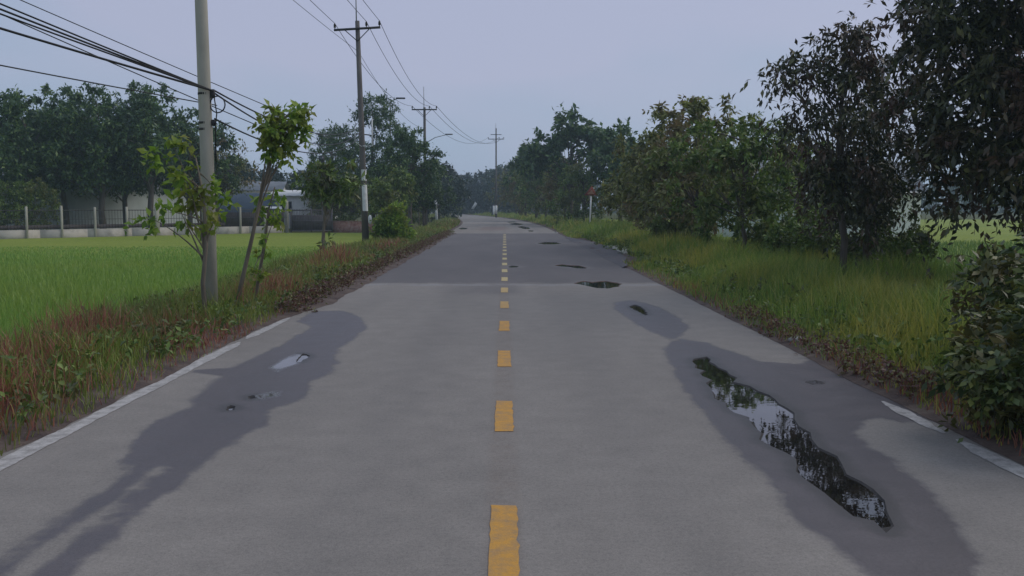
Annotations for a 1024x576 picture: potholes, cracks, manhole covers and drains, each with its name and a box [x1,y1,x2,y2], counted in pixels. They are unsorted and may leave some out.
pothole [692,357,894,533]
